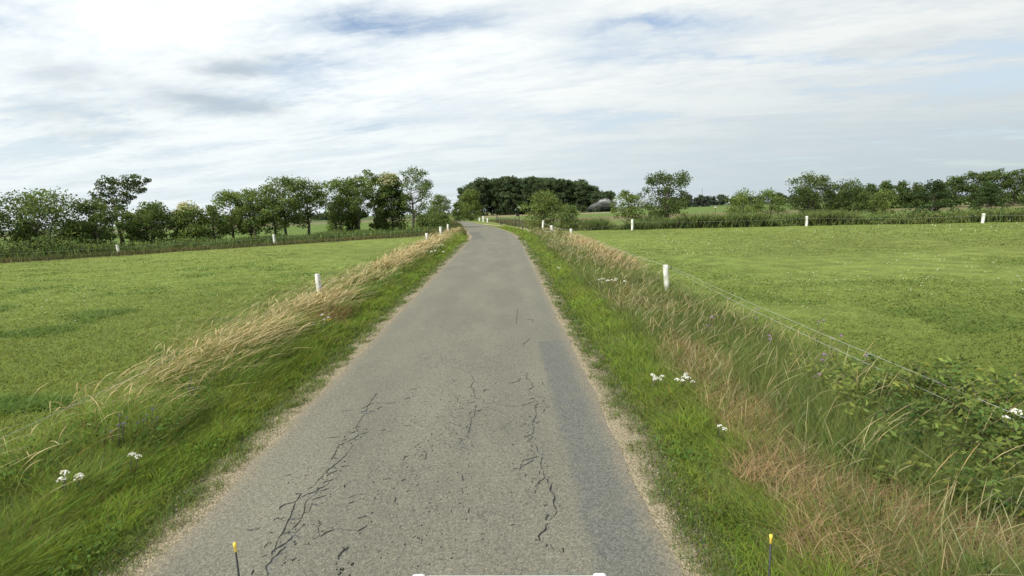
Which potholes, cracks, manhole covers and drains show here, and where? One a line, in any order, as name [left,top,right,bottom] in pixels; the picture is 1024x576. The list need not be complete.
crack [335,484,382,576]
crack [360,344,565,567]
